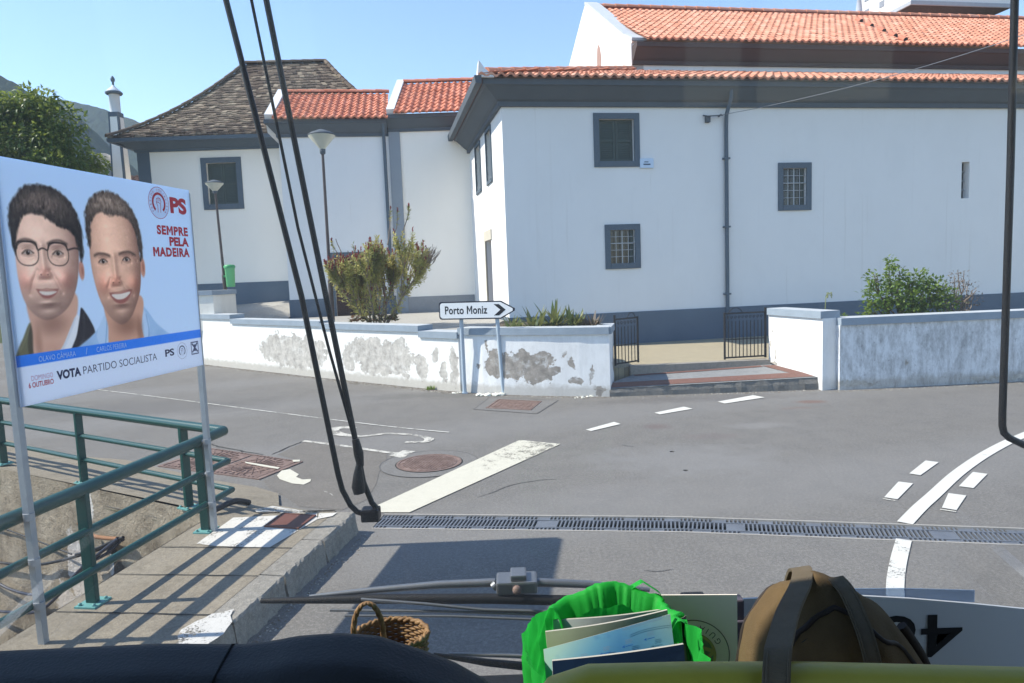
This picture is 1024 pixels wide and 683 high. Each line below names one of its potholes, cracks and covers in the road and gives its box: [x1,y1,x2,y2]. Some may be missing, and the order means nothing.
manhole cover [379,450,478,477]
manhole cover [474,397,558,414]
drain grate [371,514,1024,546]
manhole cover [264,513,316,529]
manhole cover [157,448,303,480]
